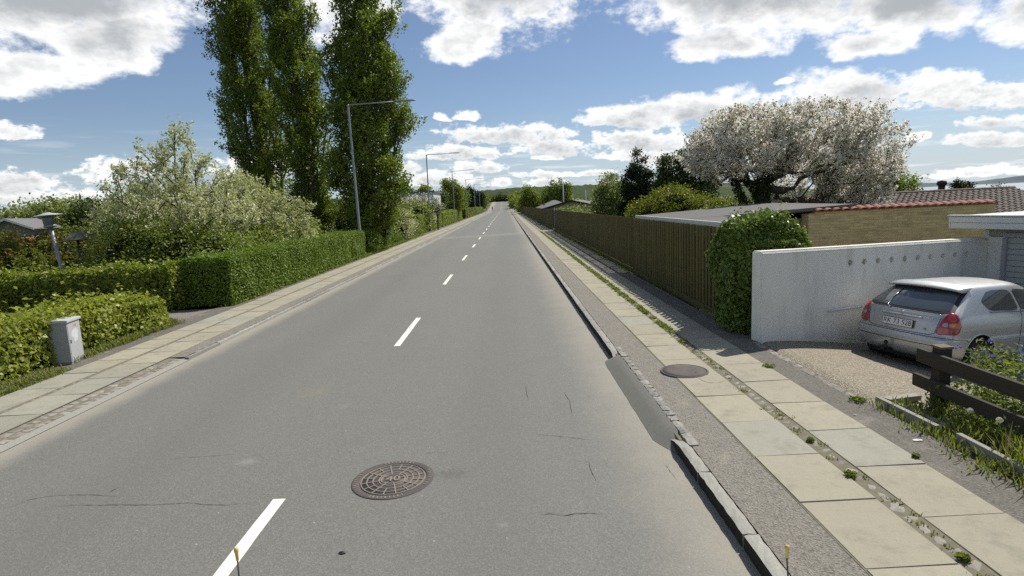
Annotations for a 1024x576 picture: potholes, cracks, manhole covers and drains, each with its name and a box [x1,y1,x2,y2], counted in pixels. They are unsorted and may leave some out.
crack [5,490,249,508]
manhole cover [660,364,709,378]
manhole cover [351,461,434,500]
